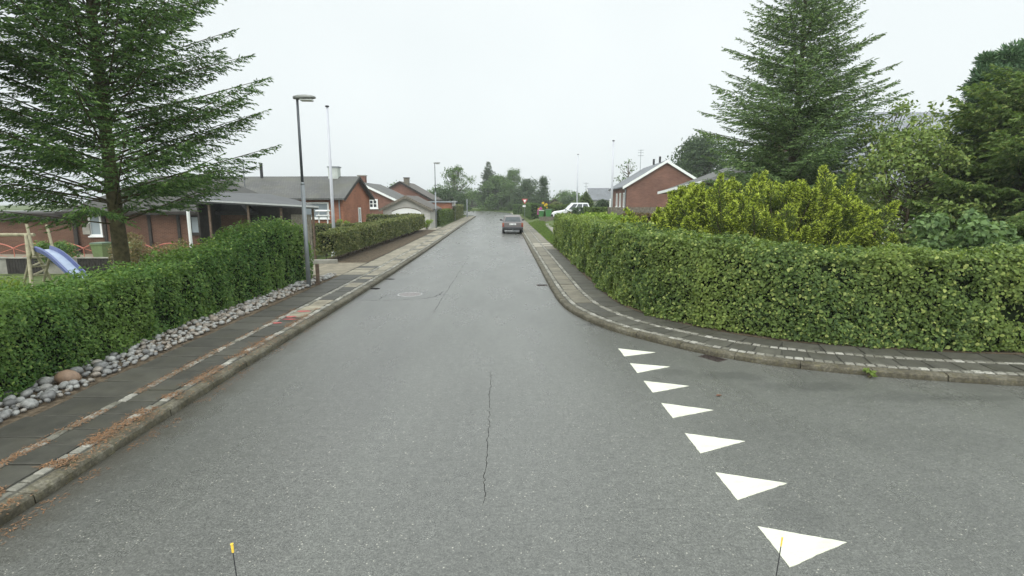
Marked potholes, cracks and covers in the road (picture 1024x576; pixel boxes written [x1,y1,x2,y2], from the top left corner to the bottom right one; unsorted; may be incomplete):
crack [482,371,492,506]
